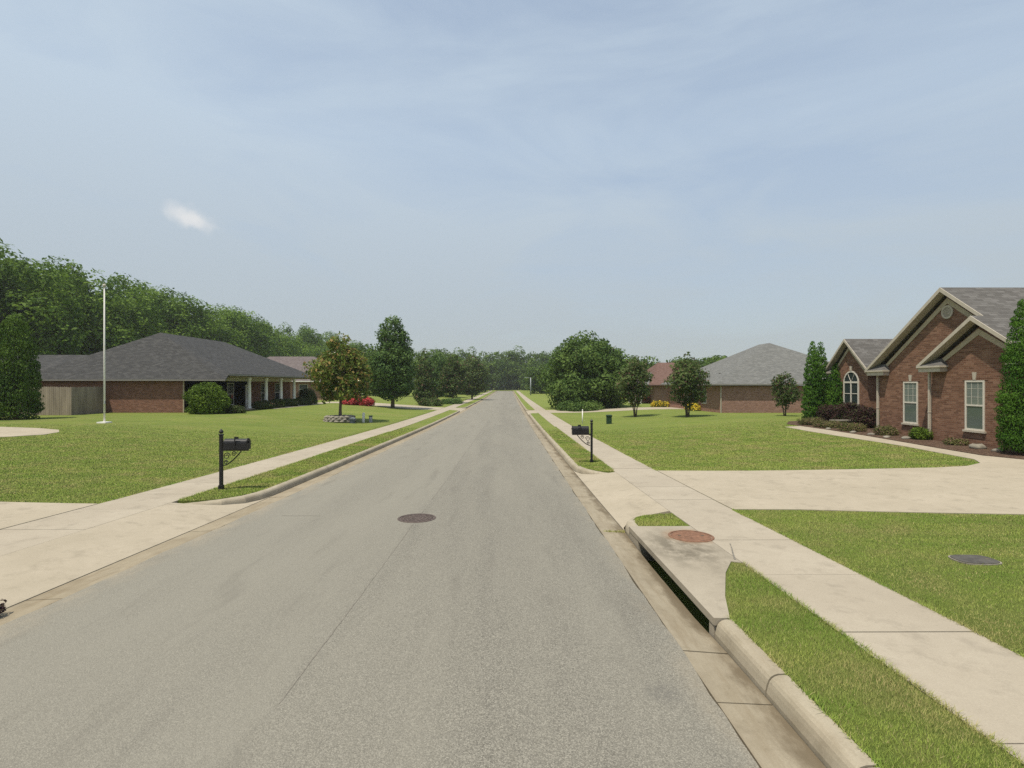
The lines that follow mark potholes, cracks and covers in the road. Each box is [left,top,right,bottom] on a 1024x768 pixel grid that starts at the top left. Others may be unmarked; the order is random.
utility cover [948,555,1002,565]
manhole cover [397,513,436,523]
drain grate [629,526,742,639]
manhole cover [668,530,715,543]
